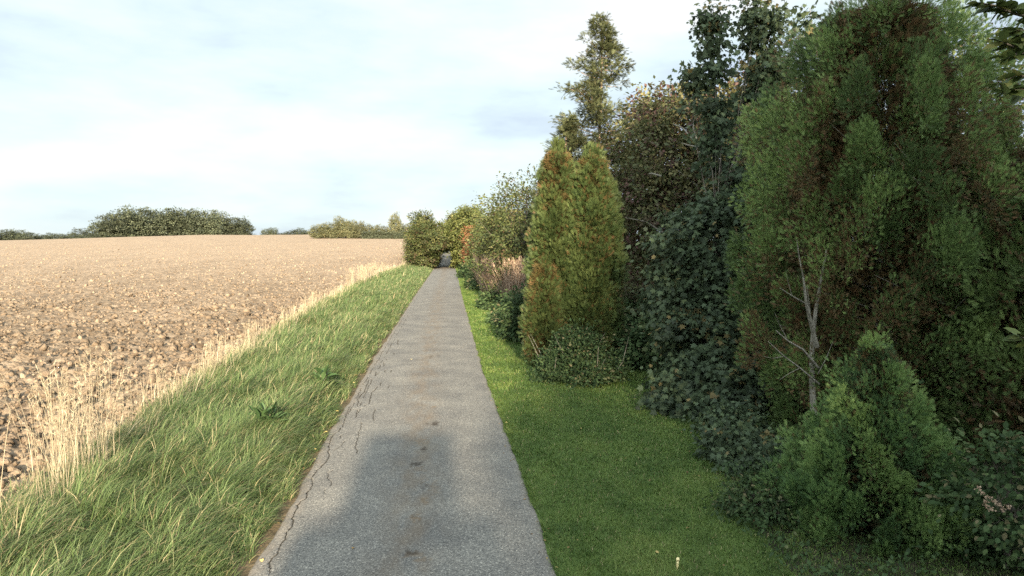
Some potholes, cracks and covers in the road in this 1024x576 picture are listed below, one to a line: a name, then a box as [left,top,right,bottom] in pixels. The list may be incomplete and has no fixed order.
crack [268,320,406,574]
